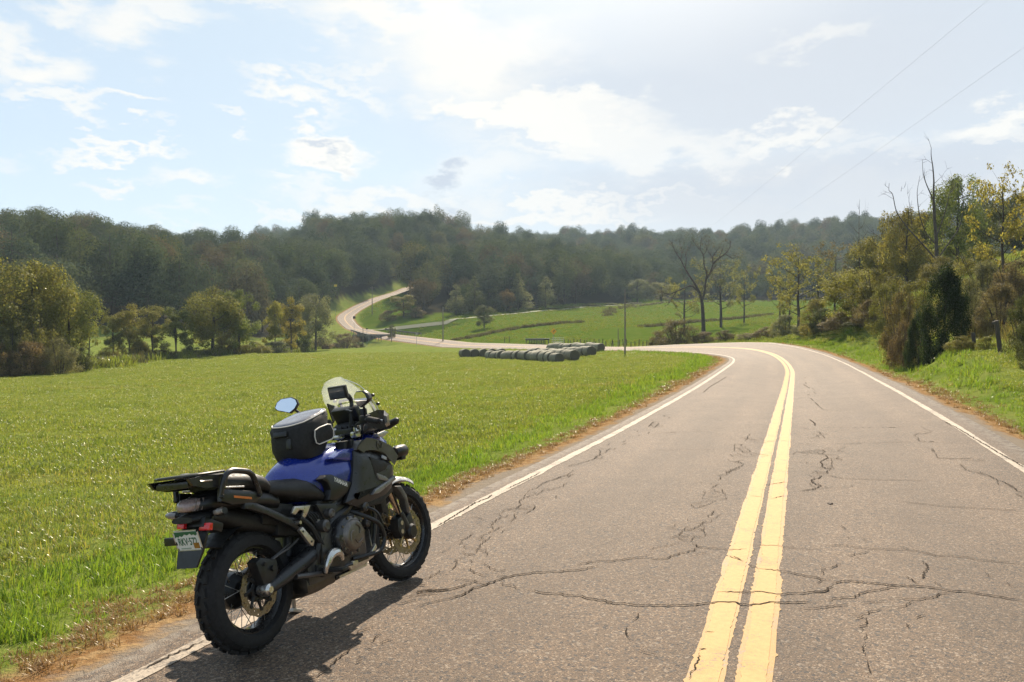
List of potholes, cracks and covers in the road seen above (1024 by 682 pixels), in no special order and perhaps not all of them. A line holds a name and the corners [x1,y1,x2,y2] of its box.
crack [138,377,1024,676]
